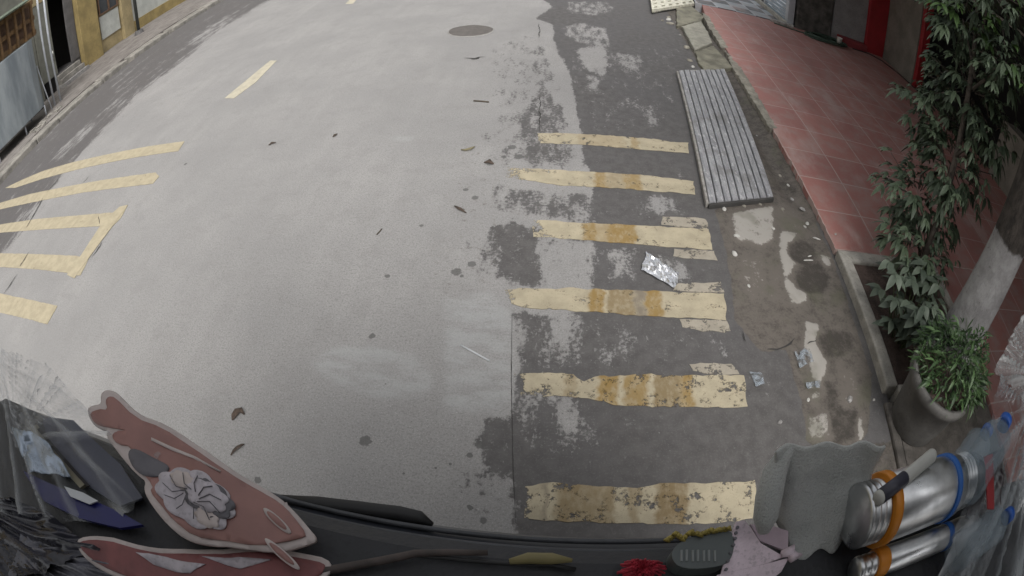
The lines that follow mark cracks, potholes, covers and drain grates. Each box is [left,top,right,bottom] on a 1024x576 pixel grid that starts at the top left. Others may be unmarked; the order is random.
manhole cover [448,25,494,37]
